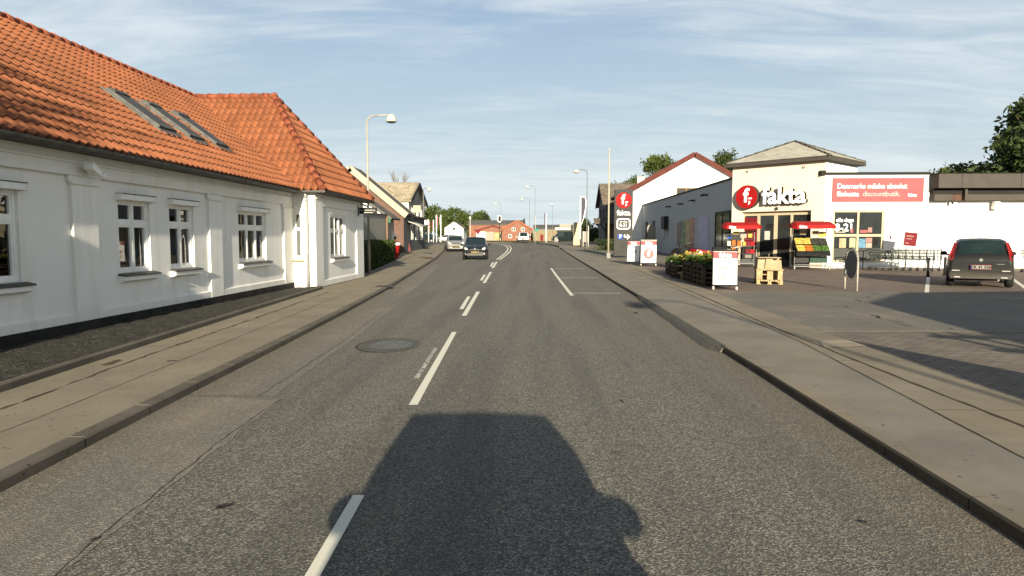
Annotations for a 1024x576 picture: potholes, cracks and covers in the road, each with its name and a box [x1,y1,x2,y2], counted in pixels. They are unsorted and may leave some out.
manhole cover [355,338,420,352]
